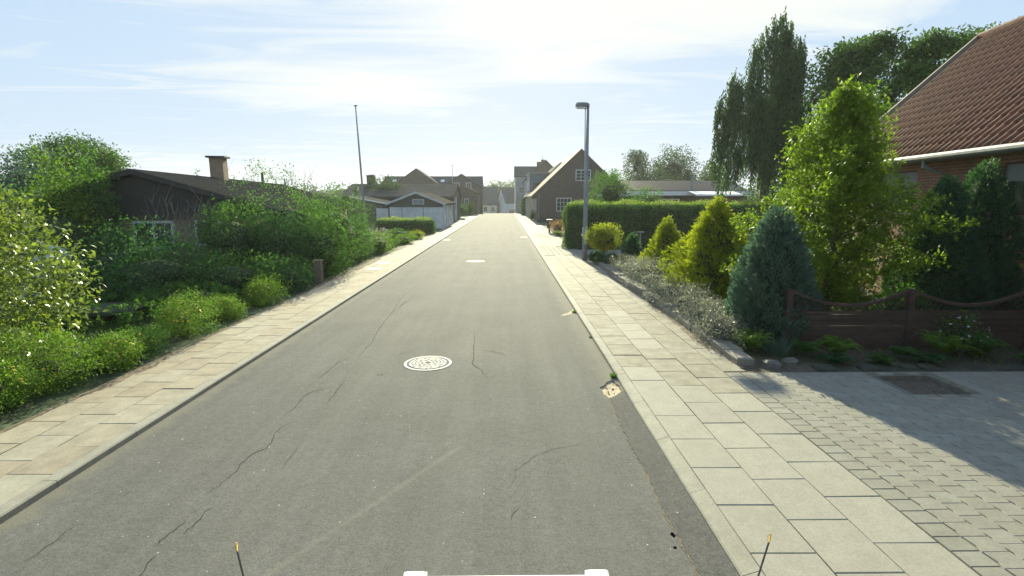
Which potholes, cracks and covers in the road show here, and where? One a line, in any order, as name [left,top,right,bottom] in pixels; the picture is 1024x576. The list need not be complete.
pothole [599,380,622,398]
crack [139,286,497,576]
manhole cover [403,356,453,371]
